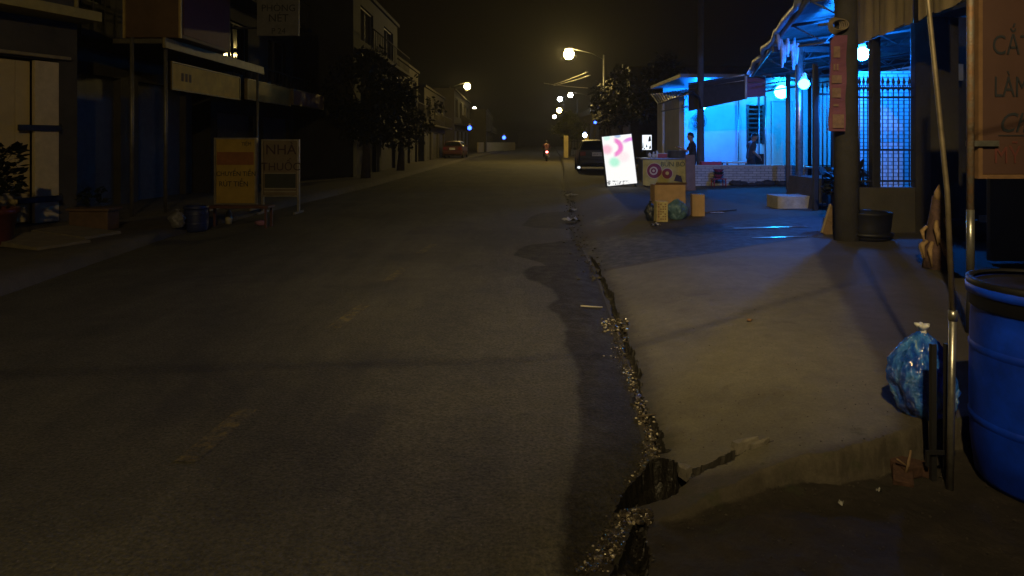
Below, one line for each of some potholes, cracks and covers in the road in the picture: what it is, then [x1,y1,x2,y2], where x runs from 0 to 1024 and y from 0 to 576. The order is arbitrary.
crack [692,440,774,478]
pothole [614,457,694,513]
crack [590,256,672,456]
